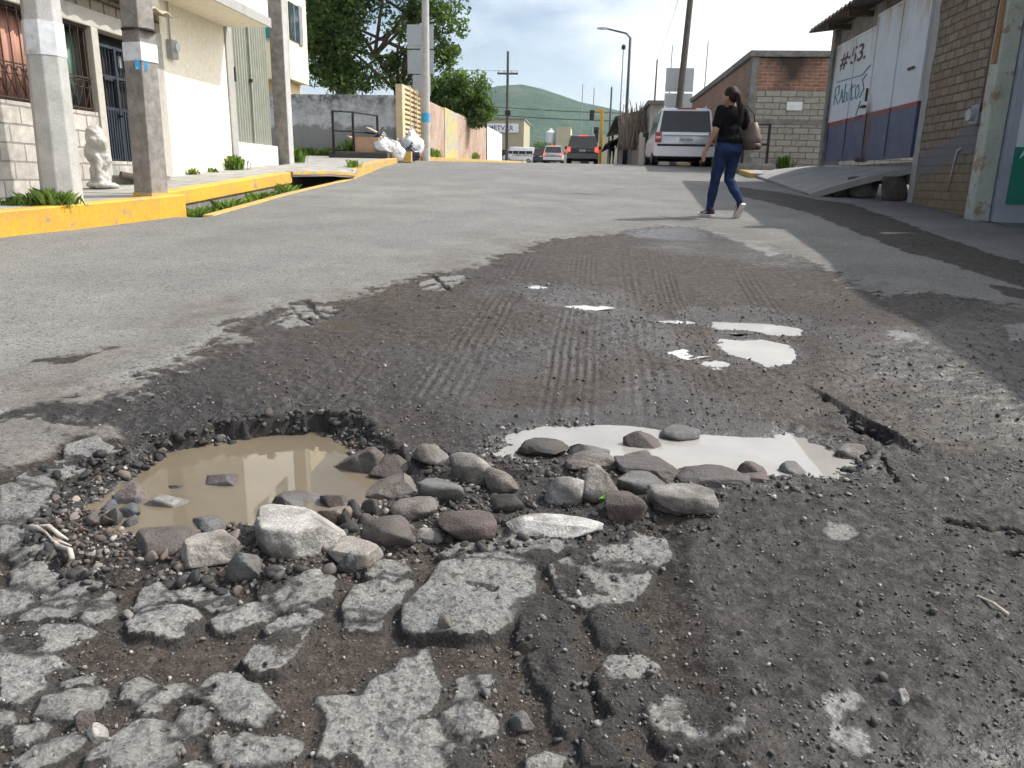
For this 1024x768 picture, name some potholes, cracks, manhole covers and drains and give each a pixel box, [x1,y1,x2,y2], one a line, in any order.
crack [820,392,901,483]
crack [941,516,1024,557]
pothole [32,411,492,591]
pothole [660,318,842,386]
pothole [478,407,895,498]
